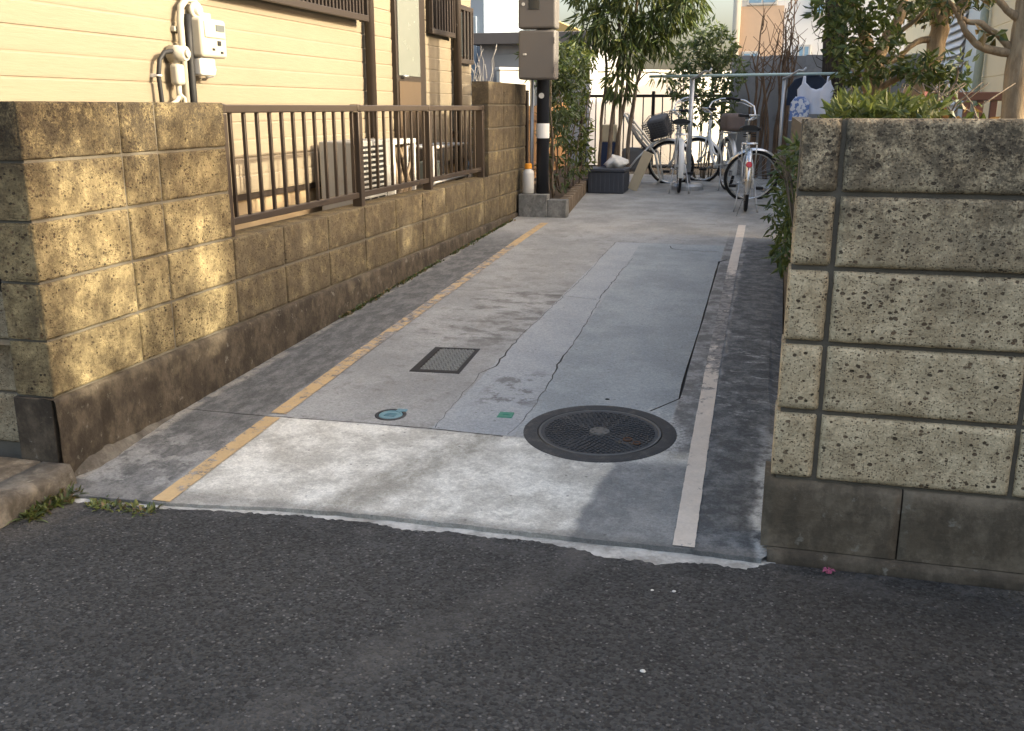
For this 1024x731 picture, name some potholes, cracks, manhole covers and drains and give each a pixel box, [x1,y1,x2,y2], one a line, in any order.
manhole cover [523,405,677,463]
crack [435,243,632,434]
